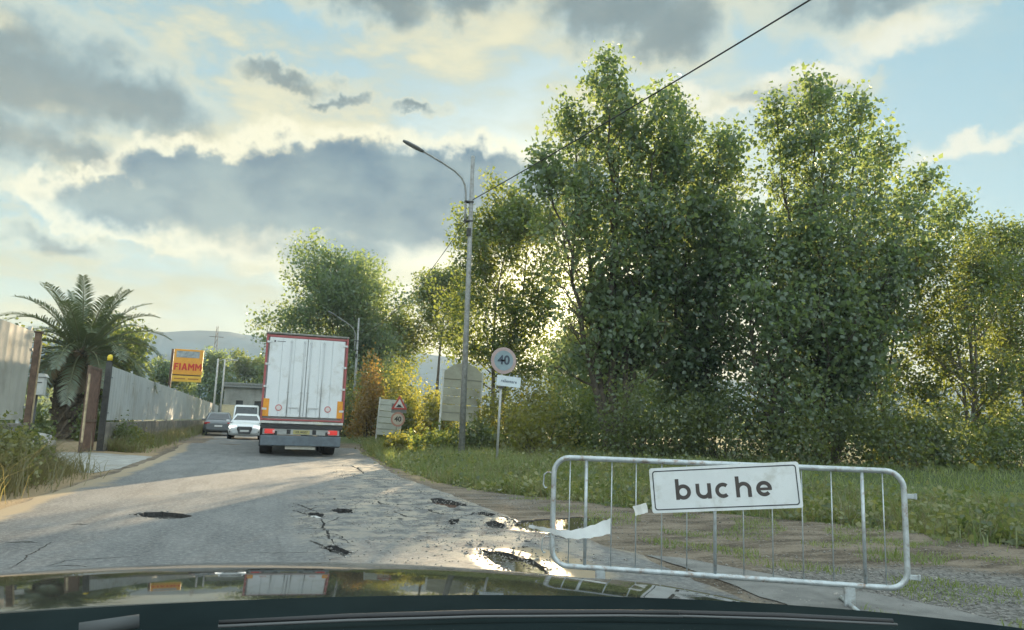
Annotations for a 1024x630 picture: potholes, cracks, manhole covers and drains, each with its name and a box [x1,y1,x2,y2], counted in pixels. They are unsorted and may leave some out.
pothole [484,520,509,529]
pothole [129,510,196,520]
pothole [476,548,558,575]
pothole [428,498,466,508]
crack [293,503,347,552]
crack [7,541,116,569]
